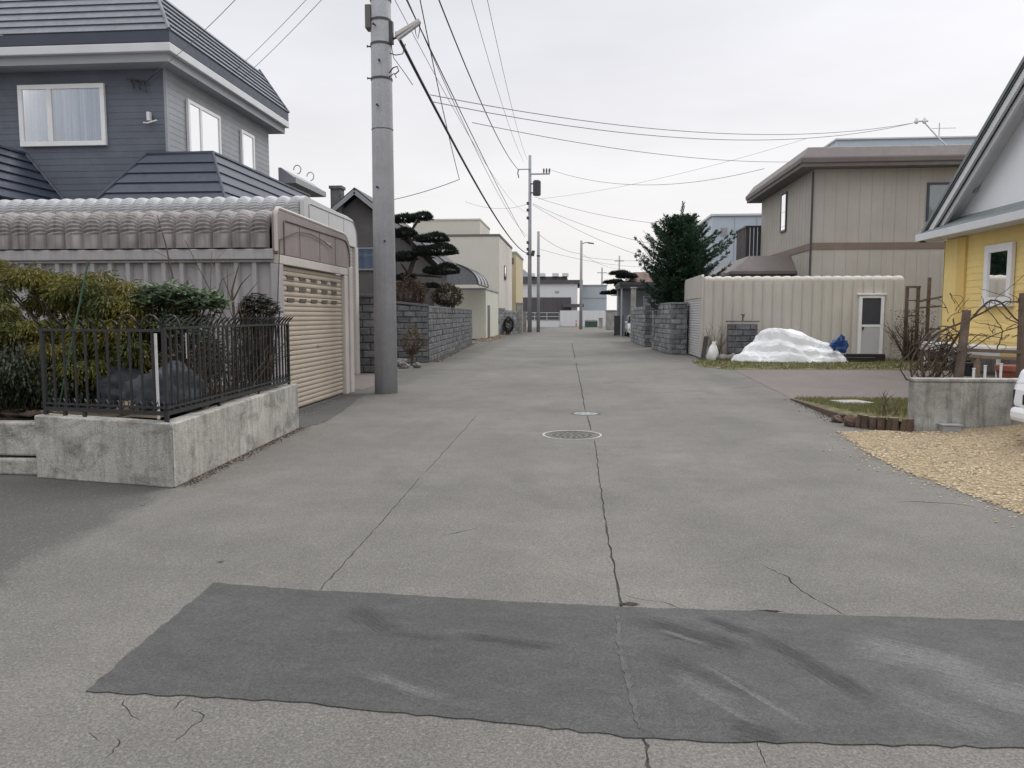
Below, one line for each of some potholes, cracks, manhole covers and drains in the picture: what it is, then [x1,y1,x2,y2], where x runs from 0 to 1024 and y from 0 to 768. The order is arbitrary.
crack [174,696,205,742]
crack [768,568,844,615]
manhole cover [542,430,602,440]
crack [643,739,651,768]
crack [572,345,678,608]
